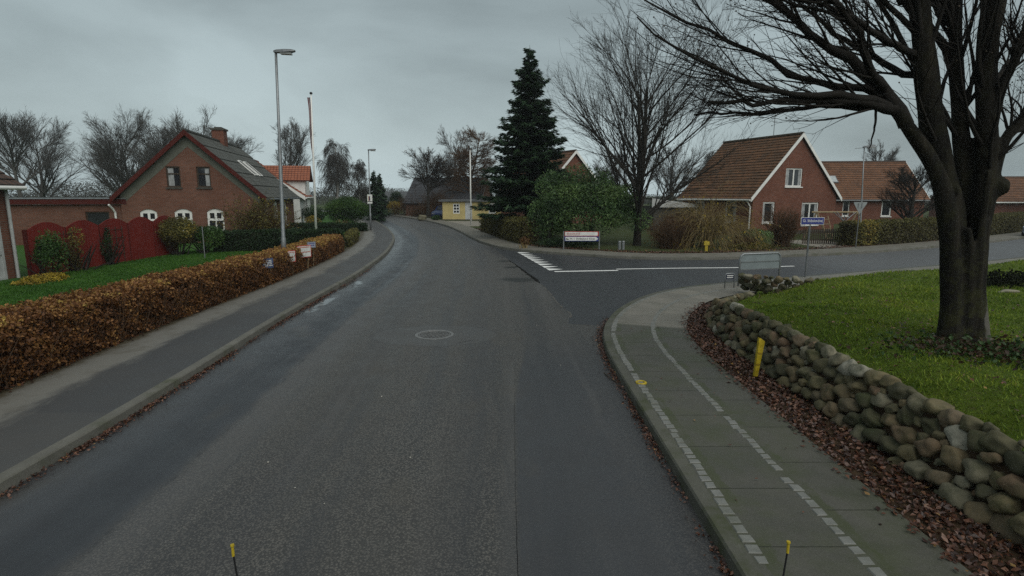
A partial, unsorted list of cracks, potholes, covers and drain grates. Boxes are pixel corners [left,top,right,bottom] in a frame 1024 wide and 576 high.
manhole cover [415,330,454,340]
